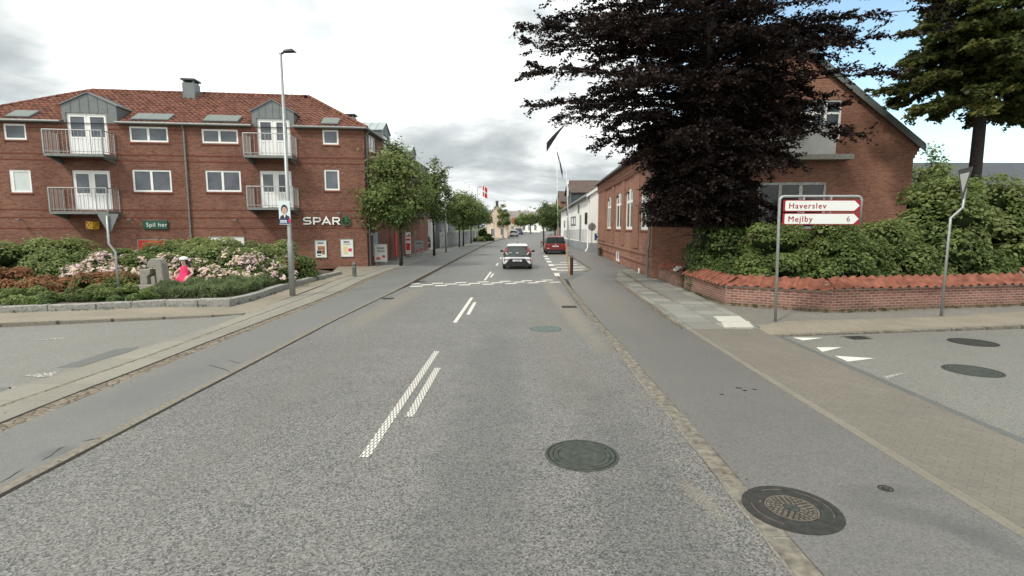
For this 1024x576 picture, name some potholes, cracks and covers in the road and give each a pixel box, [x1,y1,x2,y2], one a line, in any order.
manhole cover [741,486,846,536]
manhole cover [545,440,619,472]
manhole cover [947,338,1000,347]
manhole cover [941,364,1006,378]
